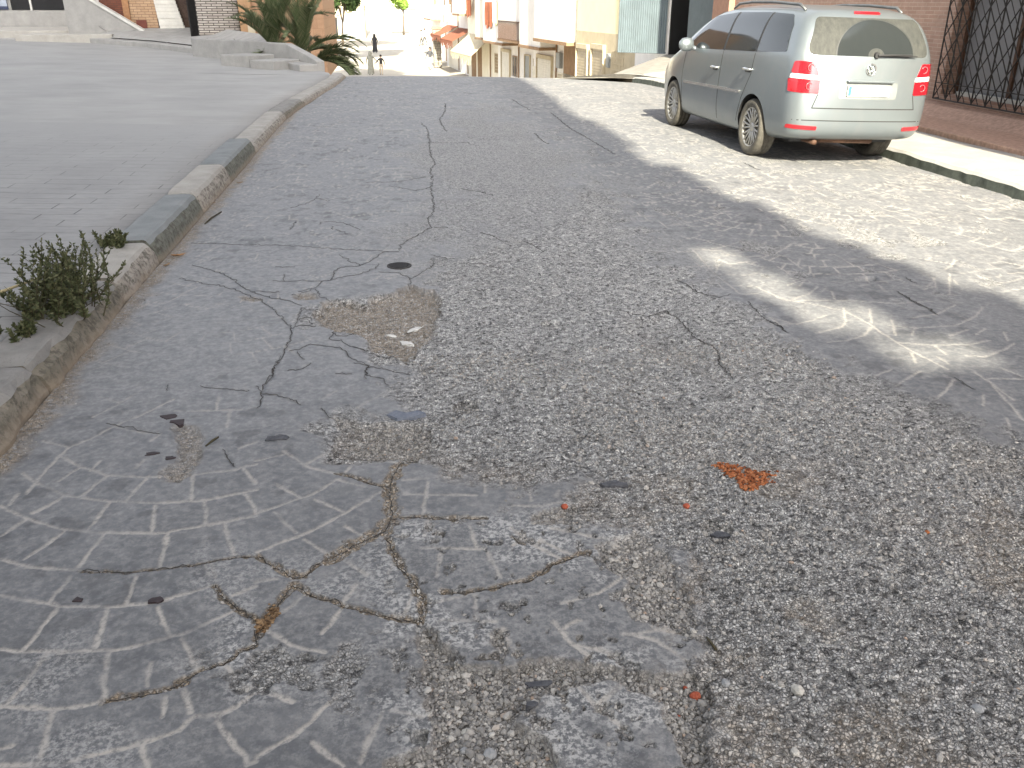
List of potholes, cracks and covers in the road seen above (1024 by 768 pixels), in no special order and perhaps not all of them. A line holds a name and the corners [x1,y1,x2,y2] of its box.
pothole [331,416,434,464]
pothole [160,424,206,483]
crack [1,293,949,766]
pothole [313,284,443,365]
manhole cover [387,262,412,270]
crack [183,104,469,408]
